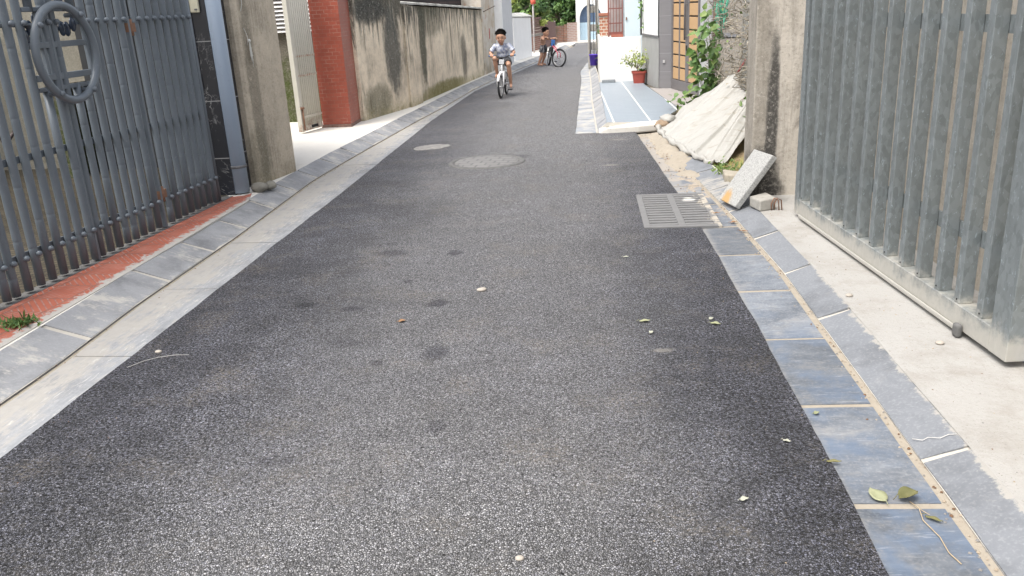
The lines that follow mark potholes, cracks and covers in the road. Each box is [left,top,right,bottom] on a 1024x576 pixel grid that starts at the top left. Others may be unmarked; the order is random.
manhole cover [448,154,525,170]
drain grate [636,192,723,229]
